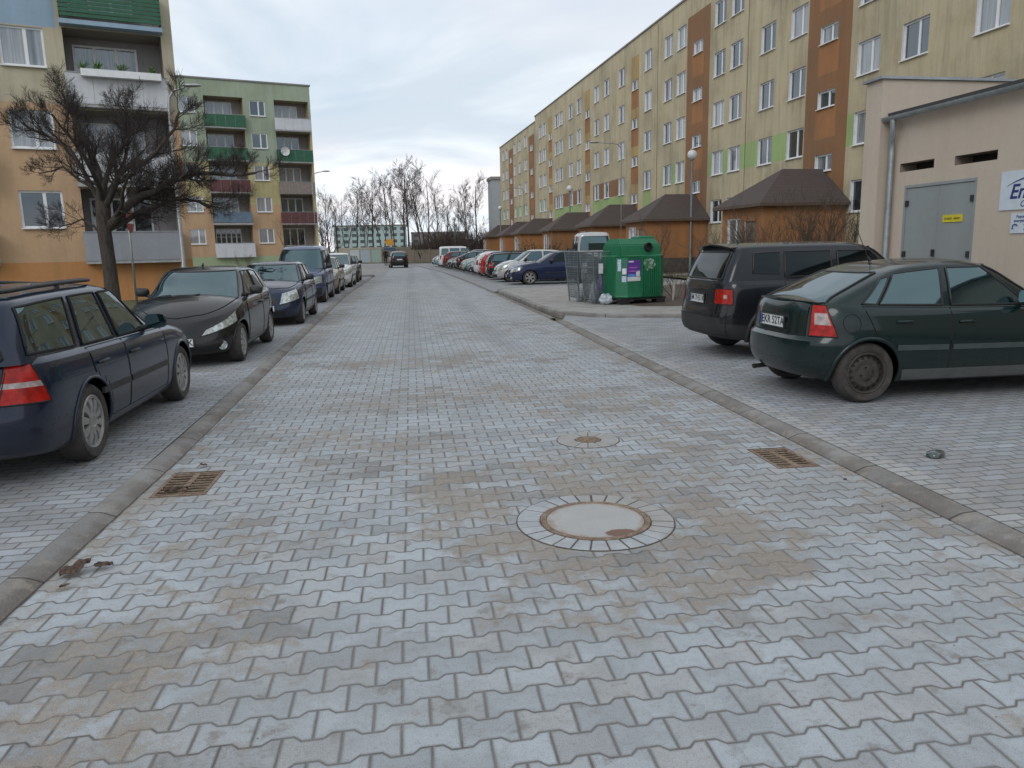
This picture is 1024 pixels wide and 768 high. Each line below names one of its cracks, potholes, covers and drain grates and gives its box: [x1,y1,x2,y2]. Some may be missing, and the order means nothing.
drain grate [747,447,820,469]
manhole cover [556,432,620,448]
manhole cover [516,495,676,552]
drain grate [149,470,226,498]
